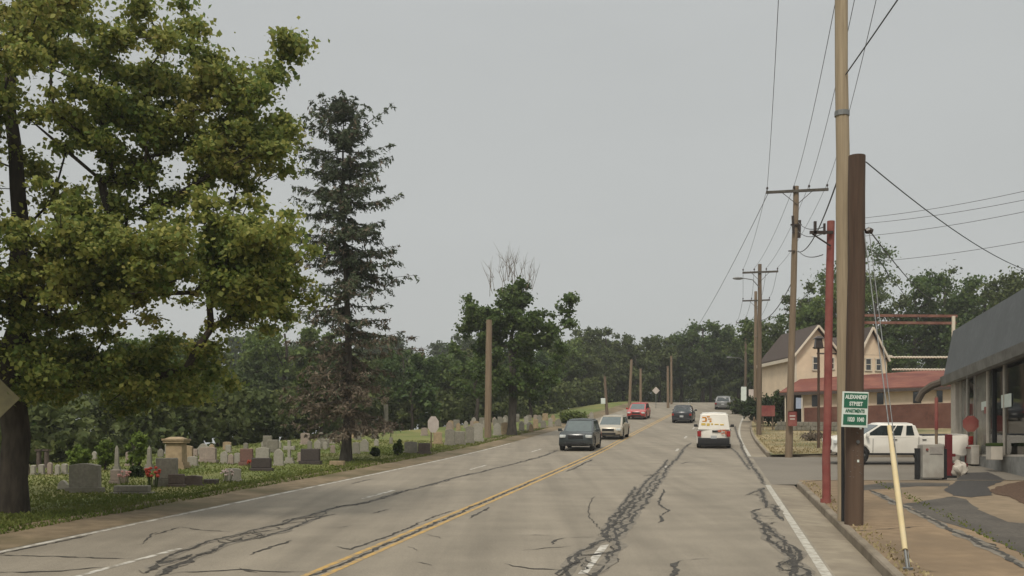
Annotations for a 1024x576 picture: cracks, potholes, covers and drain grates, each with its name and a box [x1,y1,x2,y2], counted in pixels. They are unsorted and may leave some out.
crack [730,426,815,576]
crack [0,443,692,576]
